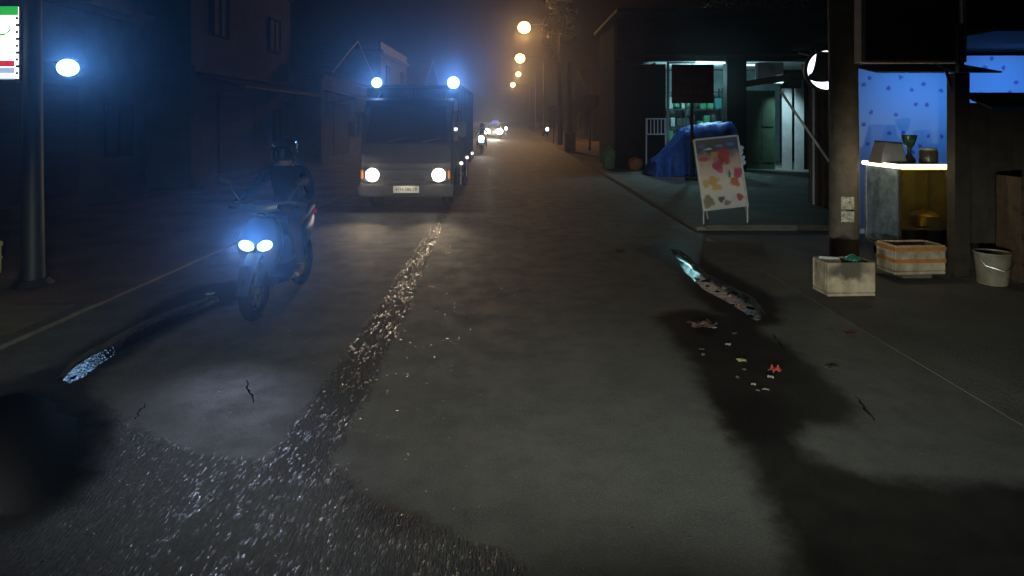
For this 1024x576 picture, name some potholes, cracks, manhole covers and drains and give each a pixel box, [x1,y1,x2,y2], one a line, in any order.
crack [854,395,875,421]
